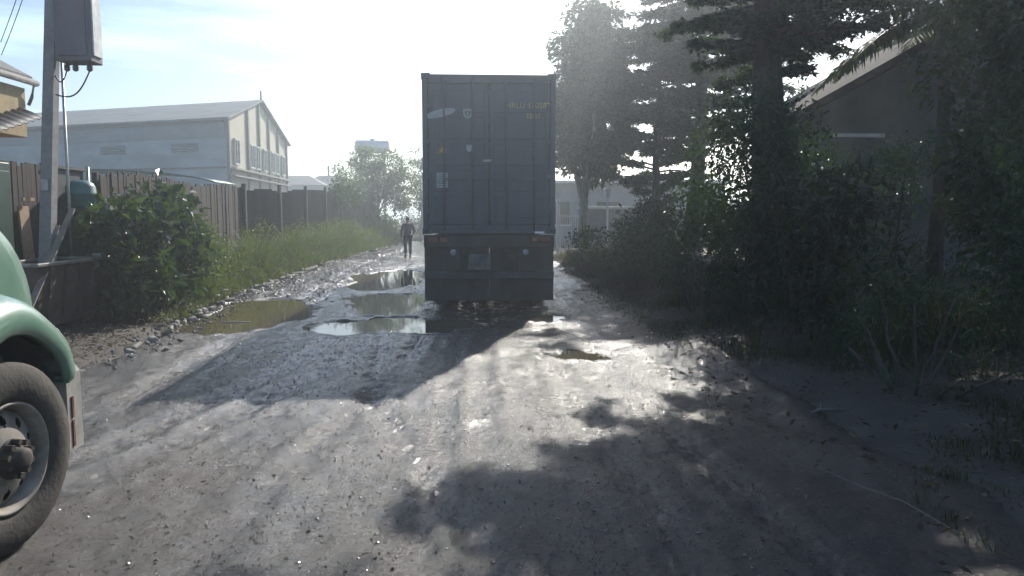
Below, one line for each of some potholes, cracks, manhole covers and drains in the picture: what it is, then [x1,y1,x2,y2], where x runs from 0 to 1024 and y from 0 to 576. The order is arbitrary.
pothole [161,297,329,337]
pothole [337,292,439,317]
pothole [534,347,620,362]
pothole [290,315,482,336]
pothole [344,269,425,291]
